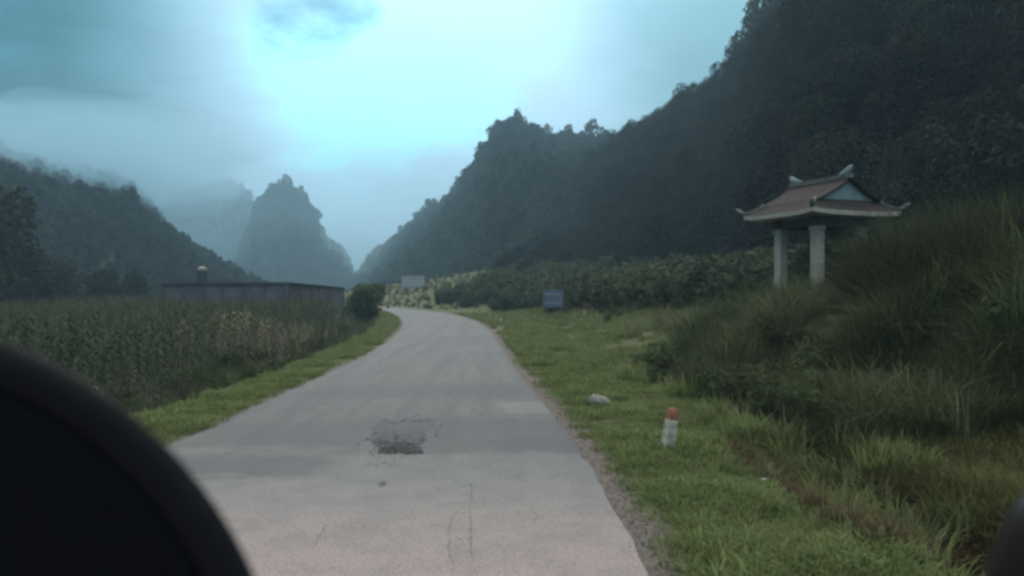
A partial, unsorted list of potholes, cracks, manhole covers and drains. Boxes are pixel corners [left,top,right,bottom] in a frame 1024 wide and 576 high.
pothole [370,417,435,455]
crack [447,485,475,572]
